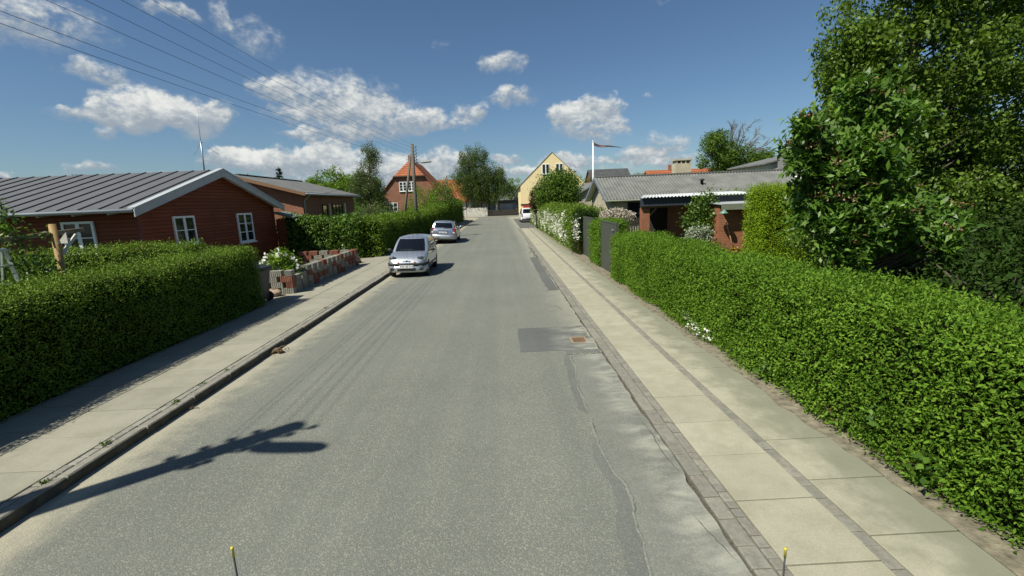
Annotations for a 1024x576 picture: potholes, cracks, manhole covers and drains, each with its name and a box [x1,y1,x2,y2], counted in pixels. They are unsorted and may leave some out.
crack [529,248,755,576]
